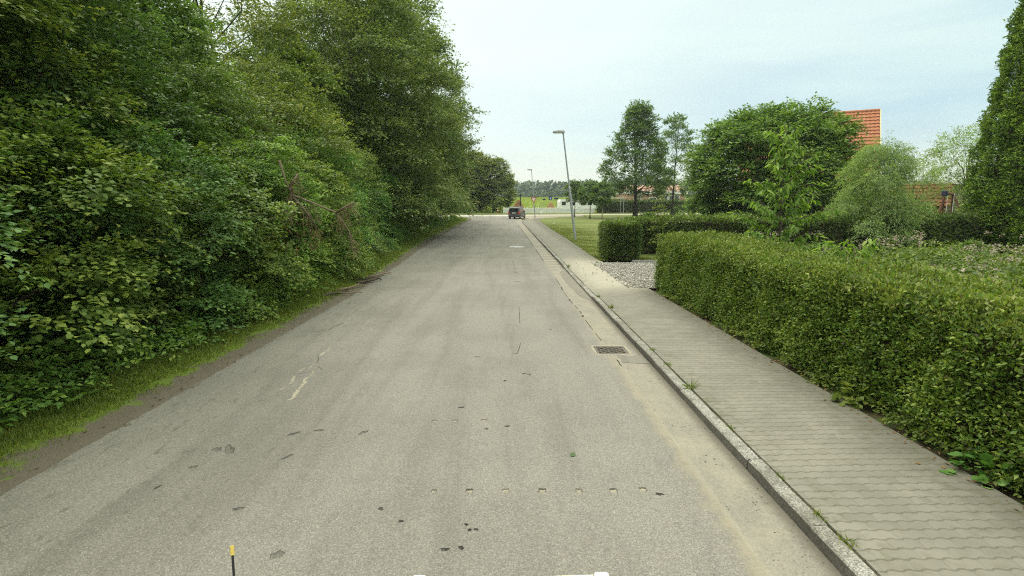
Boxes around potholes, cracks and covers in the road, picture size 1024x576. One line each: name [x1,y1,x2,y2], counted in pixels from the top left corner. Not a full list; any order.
drain grate [590,345,633,355]
